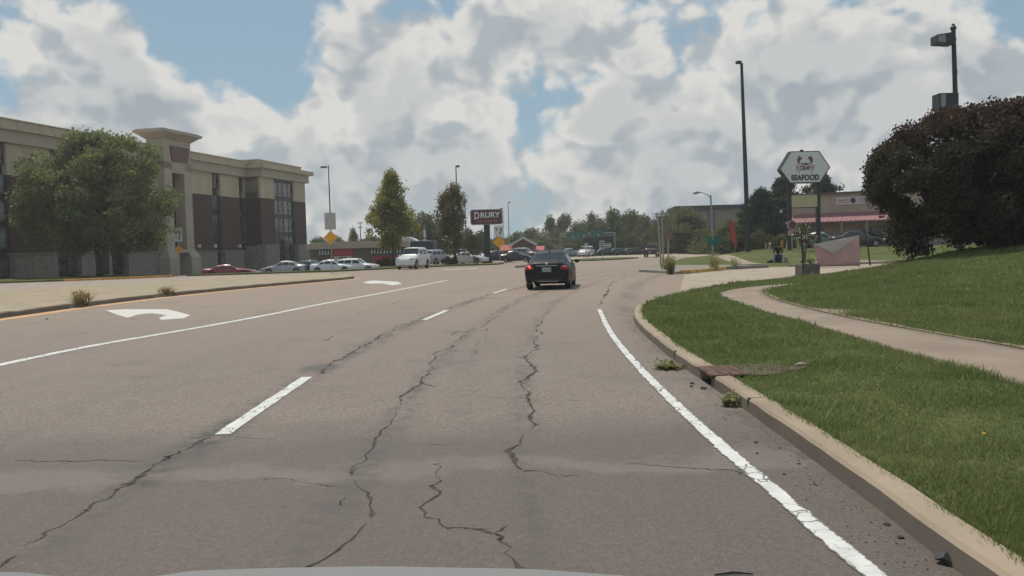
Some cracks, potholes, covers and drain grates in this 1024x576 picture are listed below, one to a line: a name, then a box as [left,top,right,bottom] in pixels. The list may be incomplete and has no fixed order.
crack [417,462,526,569]
crack [244,314,501,567]
crack [644,464,743,476]
crack [465,311,577,477]
drain grate [697,365,748,386]
